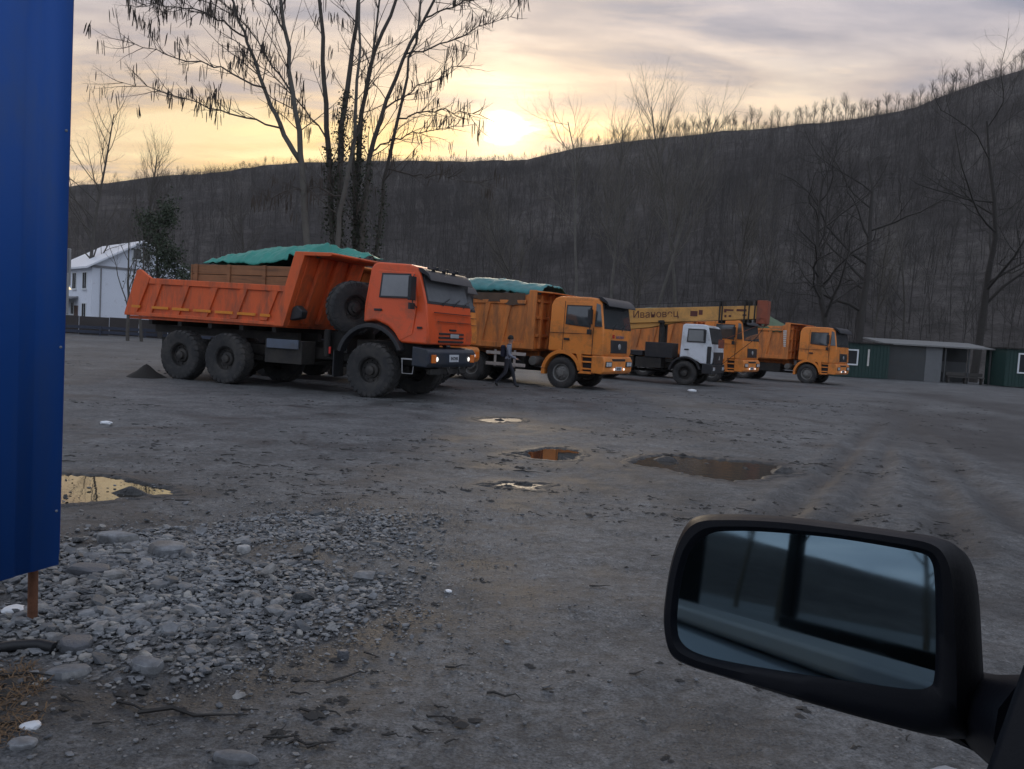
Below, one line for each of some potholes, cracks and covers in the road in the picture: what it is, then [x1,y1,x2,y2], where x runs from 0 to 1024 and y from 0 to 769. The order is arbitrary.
pothole [619,453,808,483]
pothole [61,471,196,507]
pothole [502,446,590,462]
pothole [472,480,561,493]
